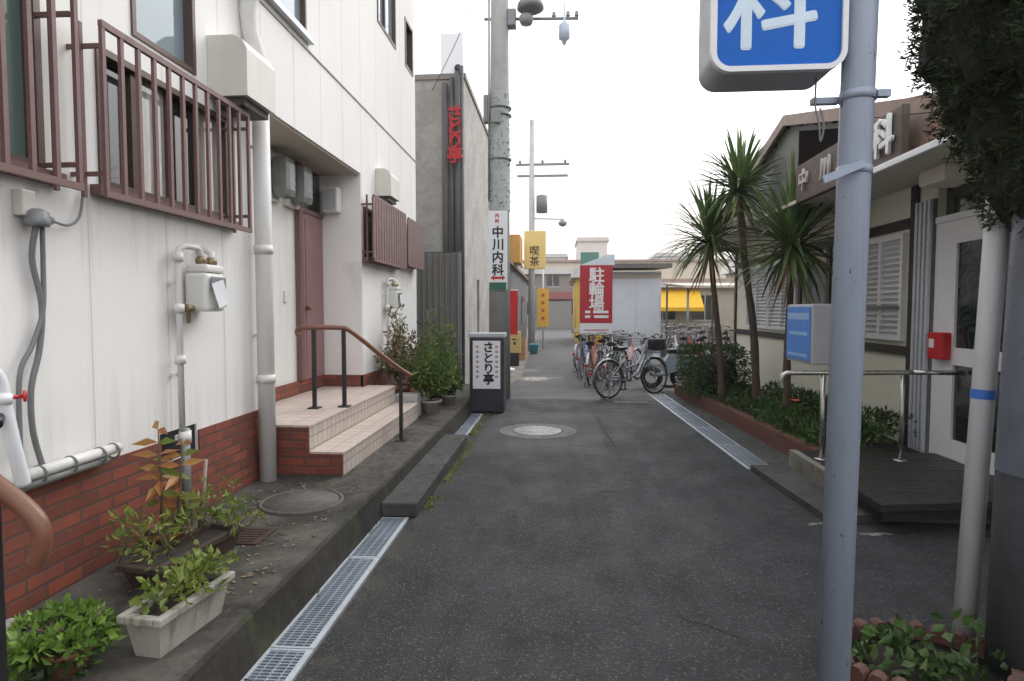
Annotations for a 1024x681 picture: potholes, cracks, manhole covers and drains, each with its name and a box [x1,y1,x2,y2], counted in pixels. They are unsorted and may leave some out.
drain grate [648,394,676,402]
drain grate [348,517,409,561]
utility cover [258,489,344,516]
drain grate [692,427,739,445]
drain grate [659,402,692,414]
drain grate [241,647,314,681]
drain grate [462,414,483,429]
crack [675,615,746,640]
drain grate [455,426,474,438]
drain grate [270,557,380,653]
manhole cover [499,423,577,439]
drain grate [674,413,713,427]
